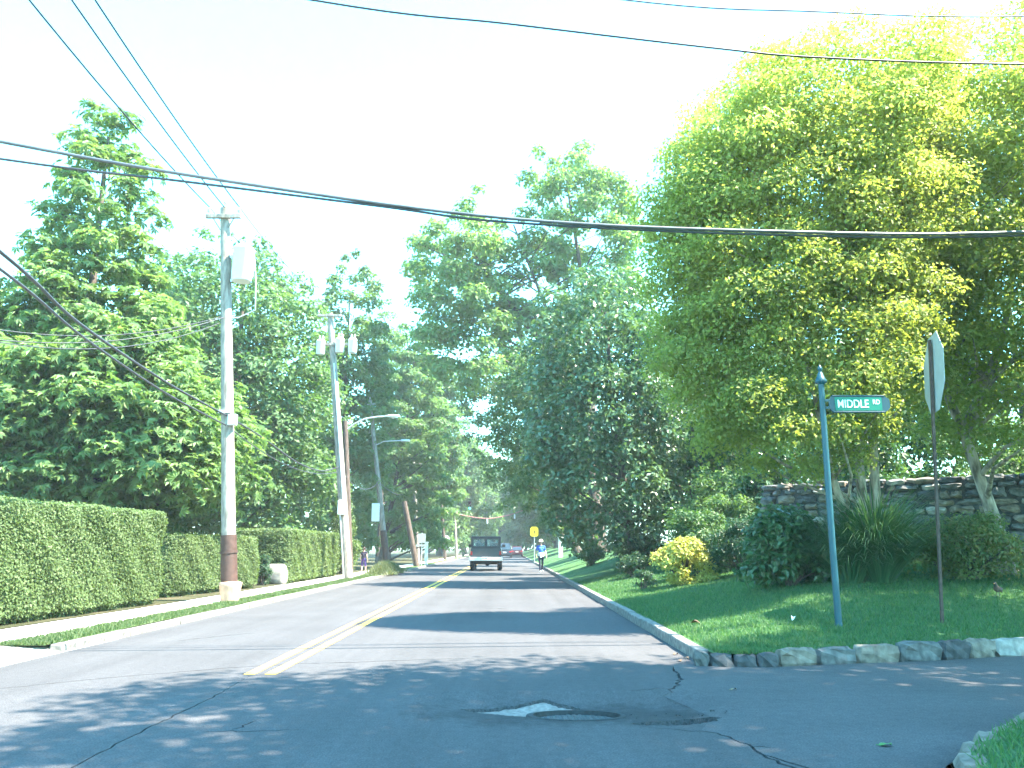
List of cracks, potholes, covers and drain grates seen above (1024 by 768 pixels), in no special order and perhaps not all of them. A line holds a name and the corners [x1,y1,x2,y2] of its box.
manhole cover [528,710,626,721]
crack [642,726,809,768]
